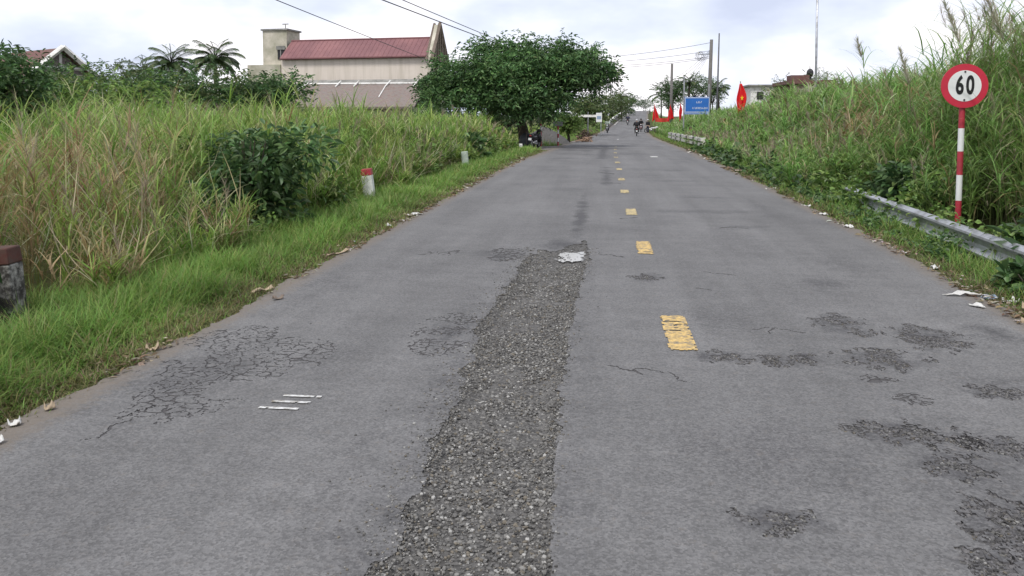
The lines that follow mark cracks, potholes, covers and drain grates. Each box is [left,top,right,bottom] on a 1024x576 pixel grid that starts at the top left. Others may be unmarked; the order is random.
pothole [695,349,757,365]
pothole [953,545,1019,576]
crack [608,365,687,382]
pothole [921,448,1002,487]
pothole [757,355,795,368]
pothole [963,383,1024,401]
pothole [969,435,1024,461]
pothole [806,313,881,337]
pothole [954,489,1024,568]
crack [80,323,337,441]
pothole [880,323,974,355]
pothole [838,418,994,452]
